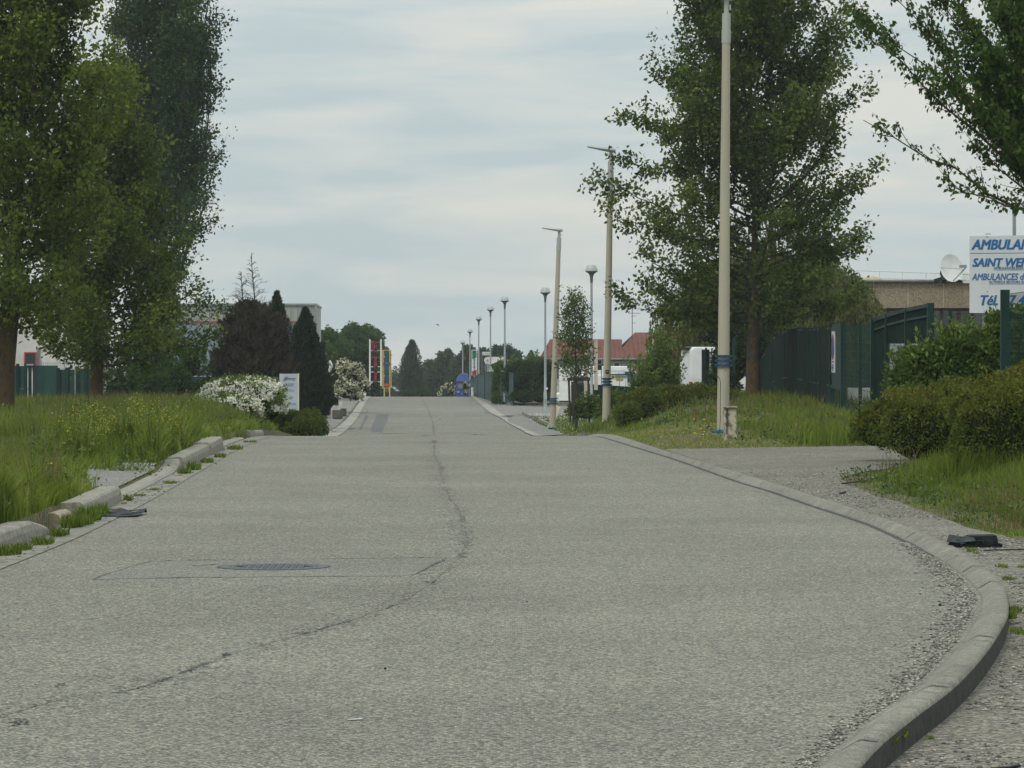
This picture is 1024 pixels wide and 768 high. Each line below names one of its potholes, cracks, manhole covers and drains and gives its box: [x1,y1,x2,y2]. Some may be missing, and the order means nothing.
crack [119,662,209,693]
crack [298,602,413,636]
